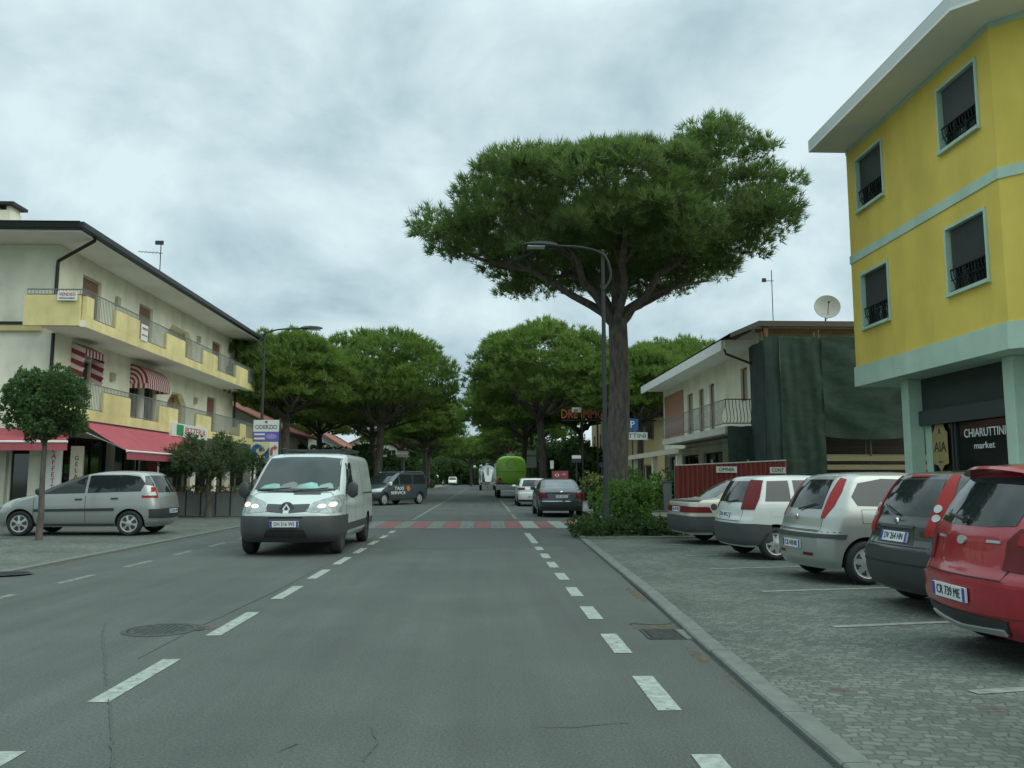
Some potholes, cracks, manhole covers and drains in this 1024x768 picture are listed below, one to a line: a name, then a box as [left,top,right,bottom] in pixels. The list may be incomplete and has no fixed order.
drain grate [639,629,687,640]
manhole cover [121,623,198,637]
